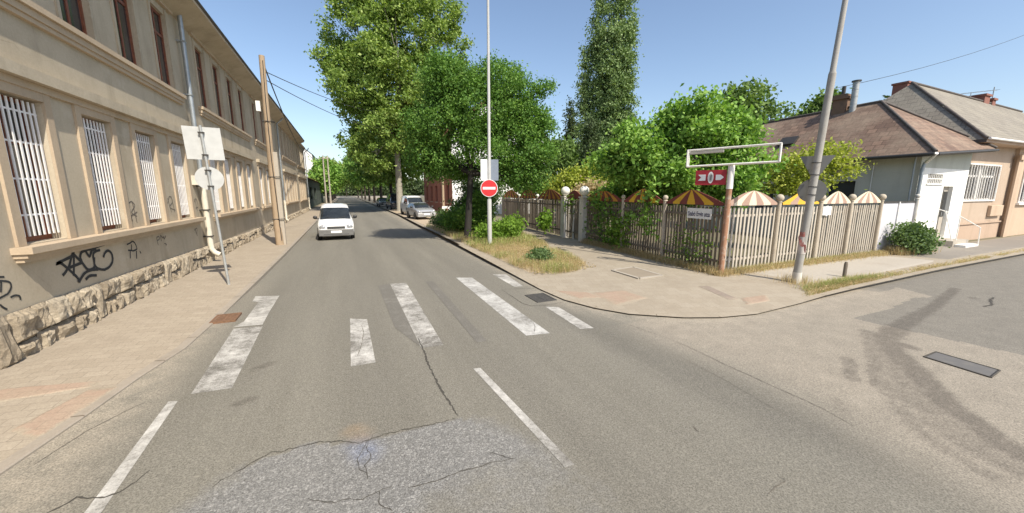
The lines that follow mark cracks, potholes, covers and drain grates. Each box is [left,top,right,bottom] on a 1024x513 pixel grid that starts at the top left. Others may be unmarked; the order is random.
crack [214,418,454,511]
crack [412,452,514,487]
crack [47,470,150,513]
drain grate [525,293,557,303]
manhole cover [611,266,664,279]
